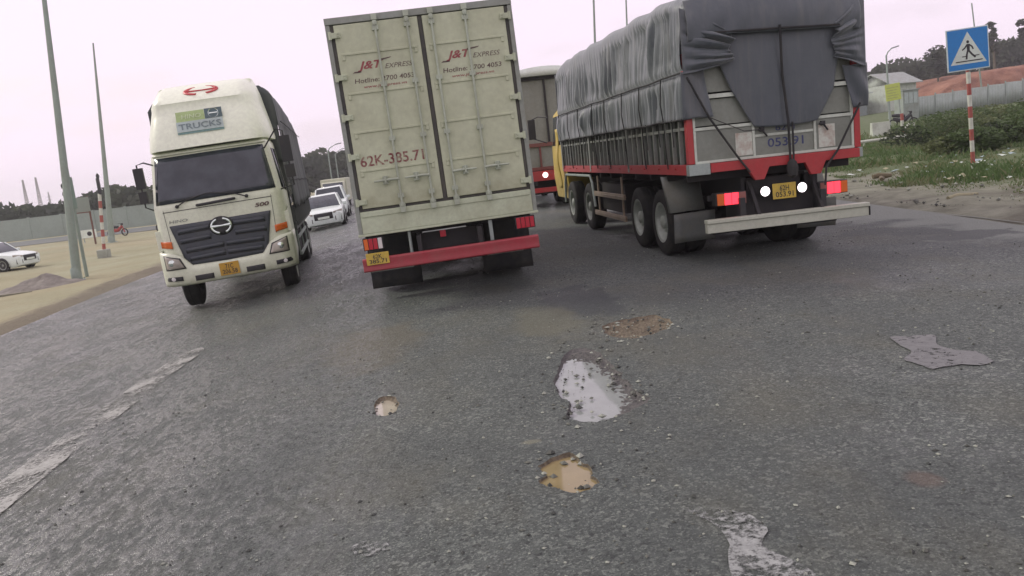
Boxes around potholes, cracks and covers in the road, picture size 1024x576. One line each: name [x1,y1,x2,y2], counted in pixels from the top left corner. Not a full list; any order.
pothole [540,339,669,432]
pothole [368,392,404,416]
pothole [524,450,602,493]
pothole [591,314,683,343]
